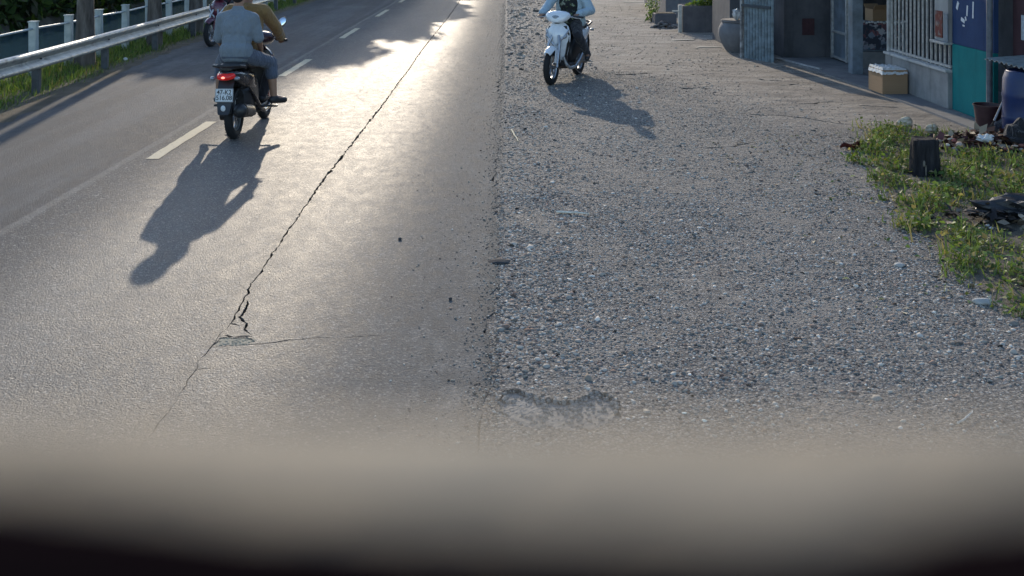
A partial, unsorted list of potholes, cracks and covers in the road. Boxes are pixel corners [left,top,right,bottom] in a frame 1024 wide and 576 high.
pothole [497,390,621,424]
crack [215,11,453,346]
